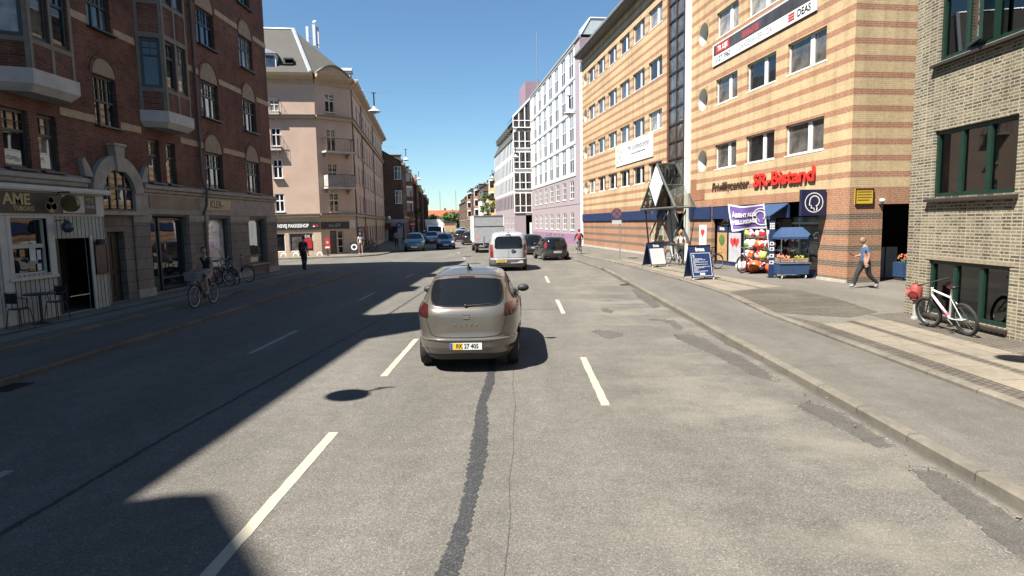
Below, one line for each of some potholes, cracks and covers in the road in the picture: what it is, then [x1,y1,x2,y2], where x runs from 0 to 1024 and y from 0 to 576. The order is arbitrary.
crack [504,369,516,576]
